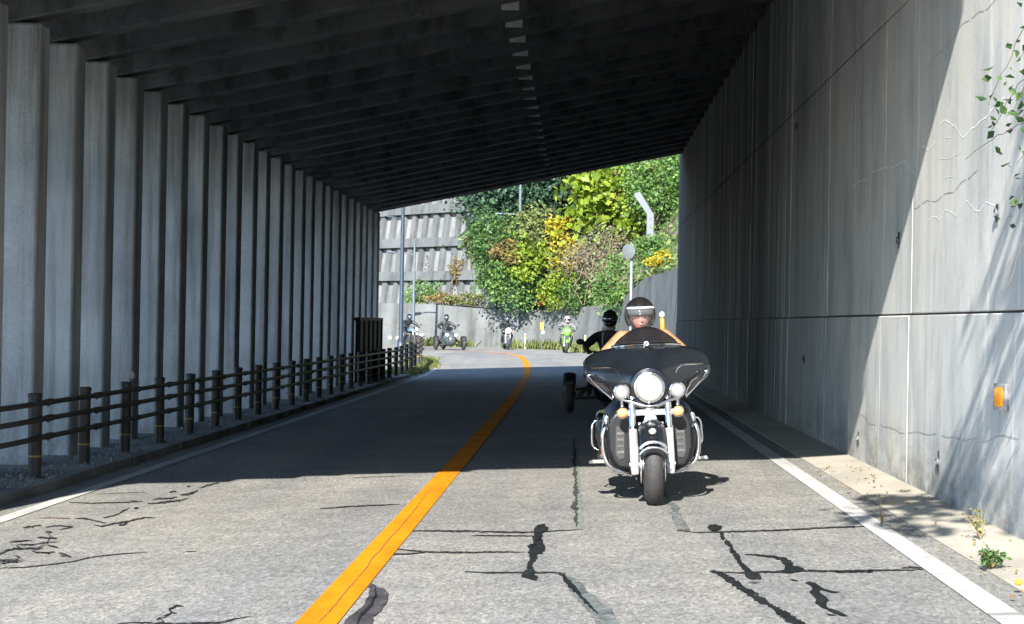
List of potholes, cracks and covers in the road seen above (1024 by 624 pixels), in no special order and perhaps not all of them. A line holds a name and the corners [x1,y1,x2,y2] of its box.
crack [123,604,253,624]
crack [320,488,576,619]
crack [0,482,219,568]
